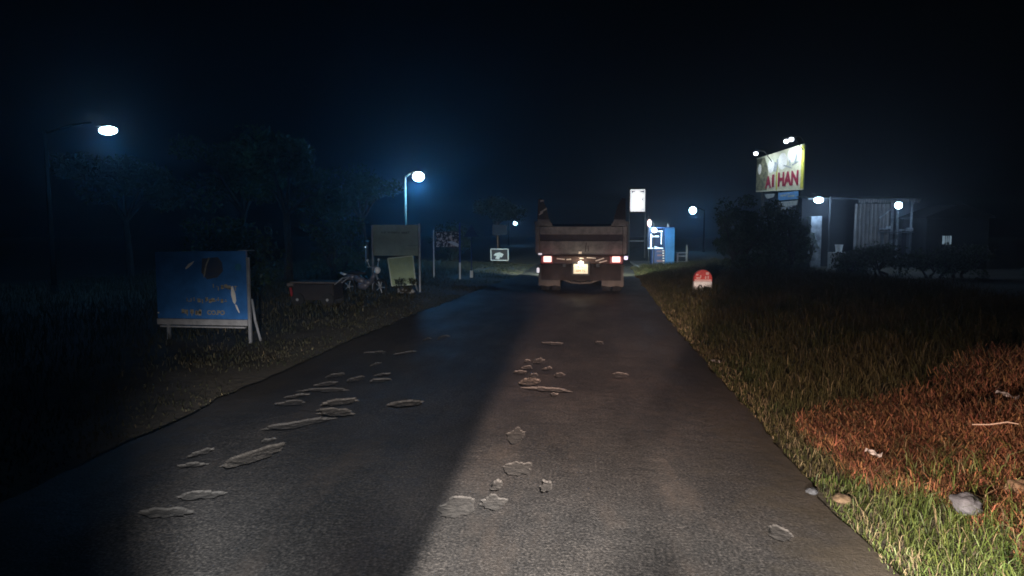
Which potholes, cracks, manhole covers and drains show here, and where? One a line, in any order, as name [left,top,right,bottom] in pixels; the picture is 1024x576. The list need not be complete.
pothole [490,479,503,491]
pothole [260,417,337,431]
pothole [506,426,526,445]
pothole [437,496,475,519]
pothole [219,442,286,470]
pothole [176,490,228,501]
pothole [502,461,532,476]
pothole [386,399,424,408]
pothole [479,494,508,511]
pothole [186,447,215,458]
pothole [539,479,552,493]
pothole [518,377,541,387]
